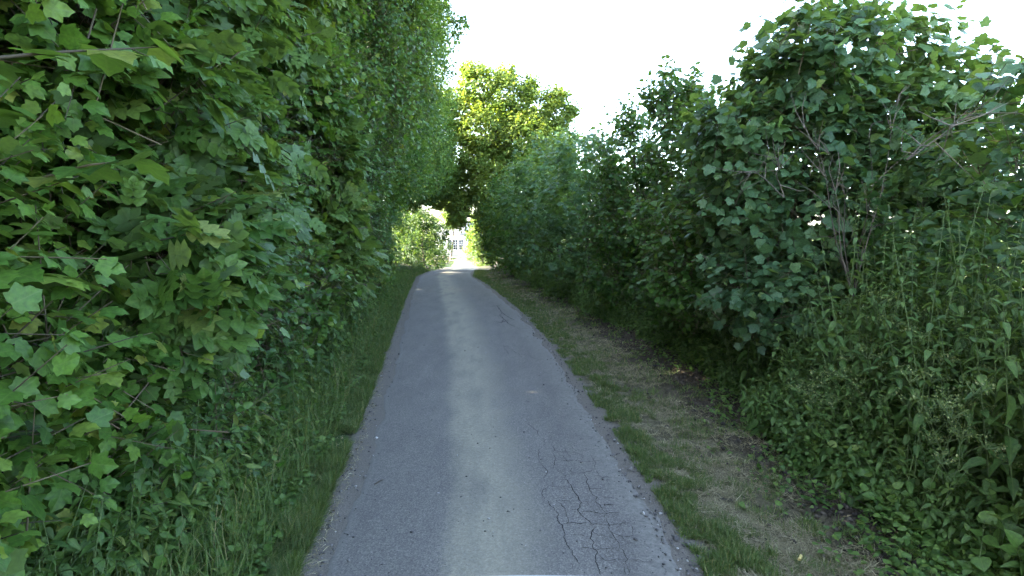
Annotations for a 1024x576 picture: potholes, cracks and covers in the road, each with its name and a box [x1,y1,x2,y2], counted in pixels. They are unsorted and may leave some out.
crack [528,424,654,575]
